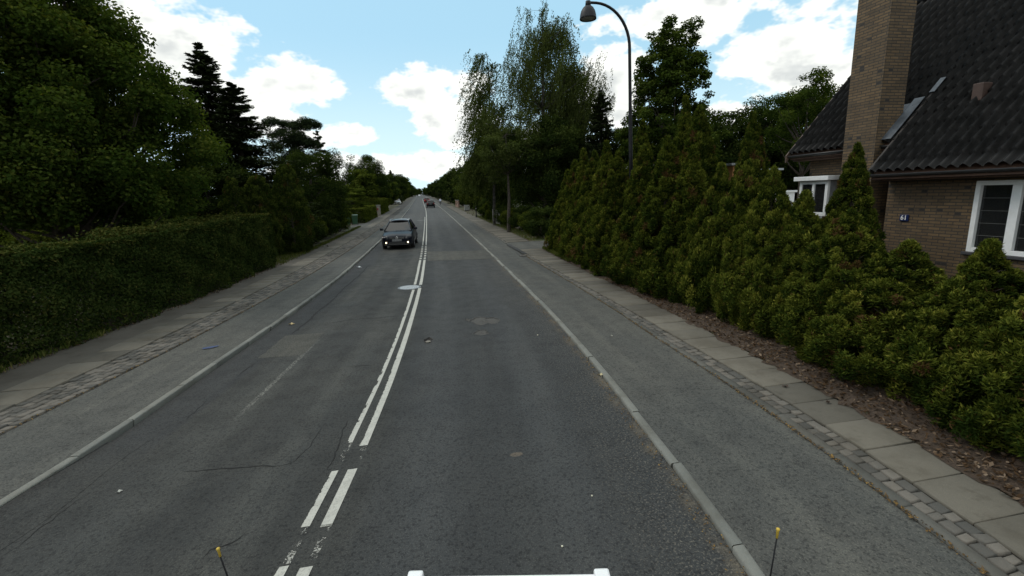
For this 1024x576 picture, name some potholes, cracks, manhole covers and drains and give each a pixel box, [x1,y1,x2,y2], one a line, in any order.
crack [184,421,348,472]
